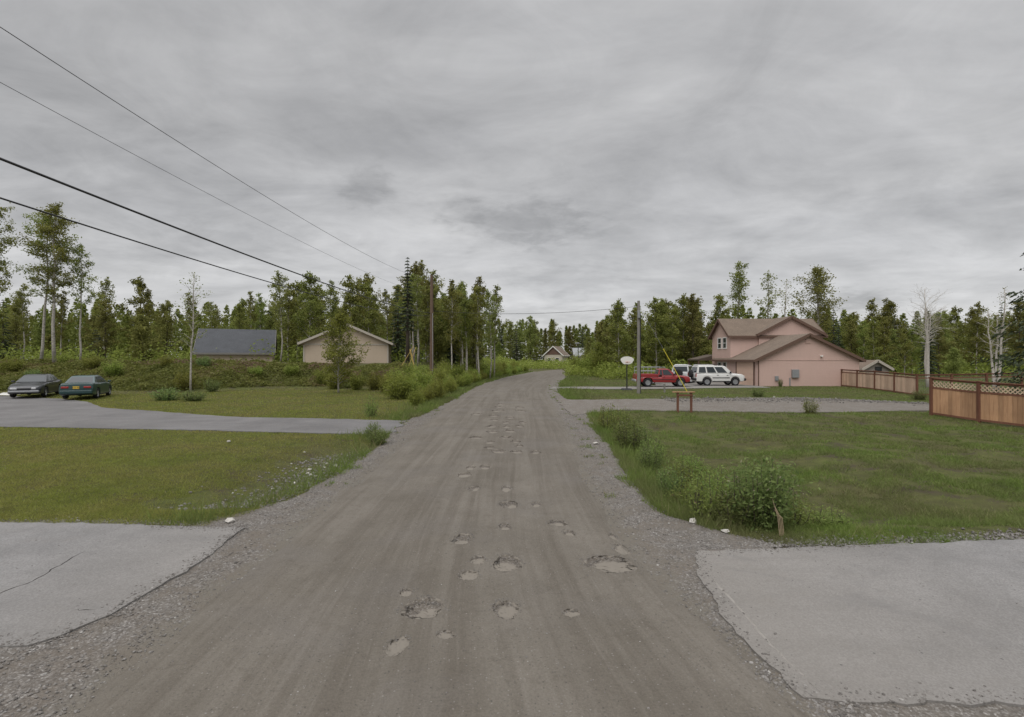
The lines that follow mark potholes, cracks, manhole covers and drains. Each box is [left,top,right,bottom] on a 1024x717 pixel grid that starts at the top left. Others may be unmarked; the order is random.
pothole [436,629,456,639]
pothole [395,594,451,619]
pothole [468,555,488,565]
pothole [489,553,526,572]
pothole [397,588,415,597]
pothole [611,543,632,555]
pothole [497,499,519,509]
pothole [488,598,522,619]
crack [1,552,83,593]
pothole [580,553,643,574]
pothole [382,634,411,656]
pothole [458,569,481,580]
